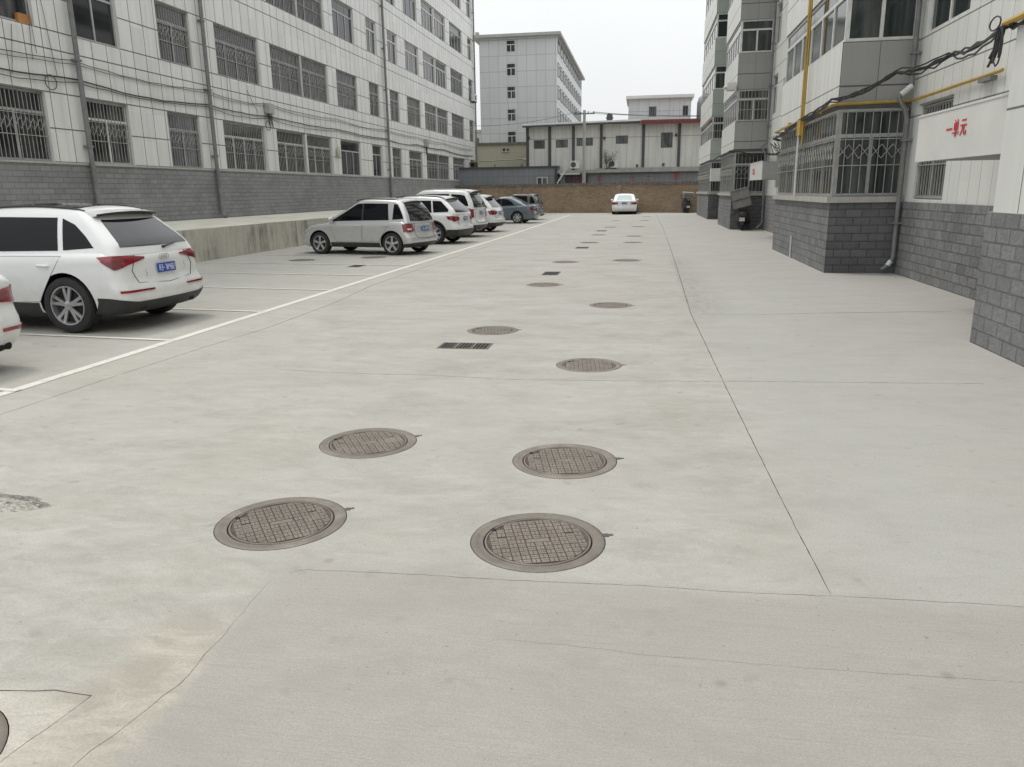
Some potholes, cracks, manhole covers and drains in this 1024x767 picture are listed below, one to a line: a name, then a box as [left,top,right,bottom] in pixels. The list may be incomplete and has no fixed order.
manhole cover [467,326,520,335]
manhole cover [512,444,624,479]
manhole cover [319,428,422,459]
manhole cover [556,358,624,372]
manhole cover [470,513,614,573]
pothole [0,493,52,512]
manhole cover [213,497,355,551]
